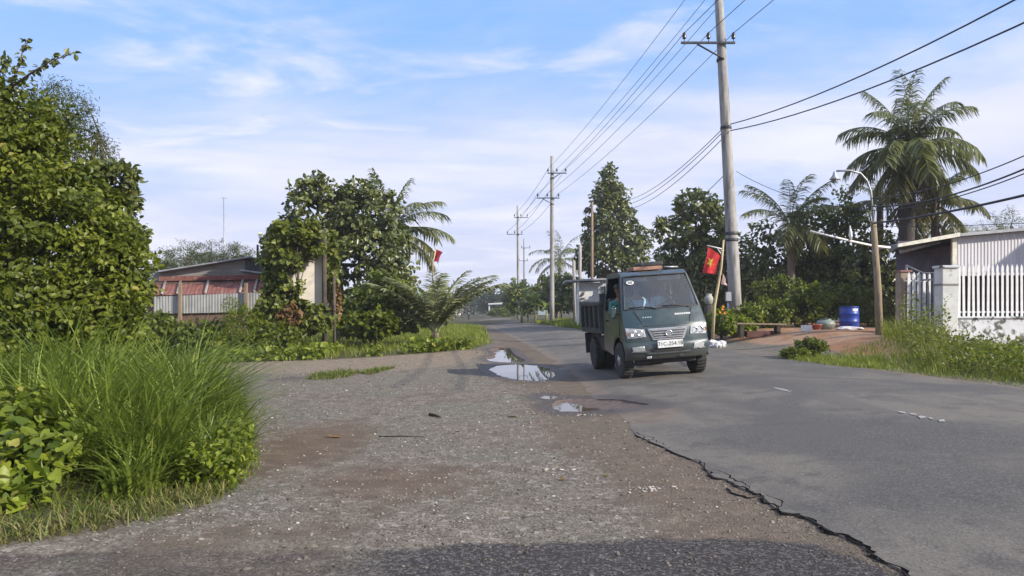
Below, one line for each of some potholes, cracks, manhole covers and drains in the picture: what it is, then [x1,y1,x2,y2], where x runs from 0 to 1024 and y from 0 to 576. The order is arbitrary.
crack [635,432,910,576]
pothole [488,364,558,381]
pothole [485,347,525,365]
